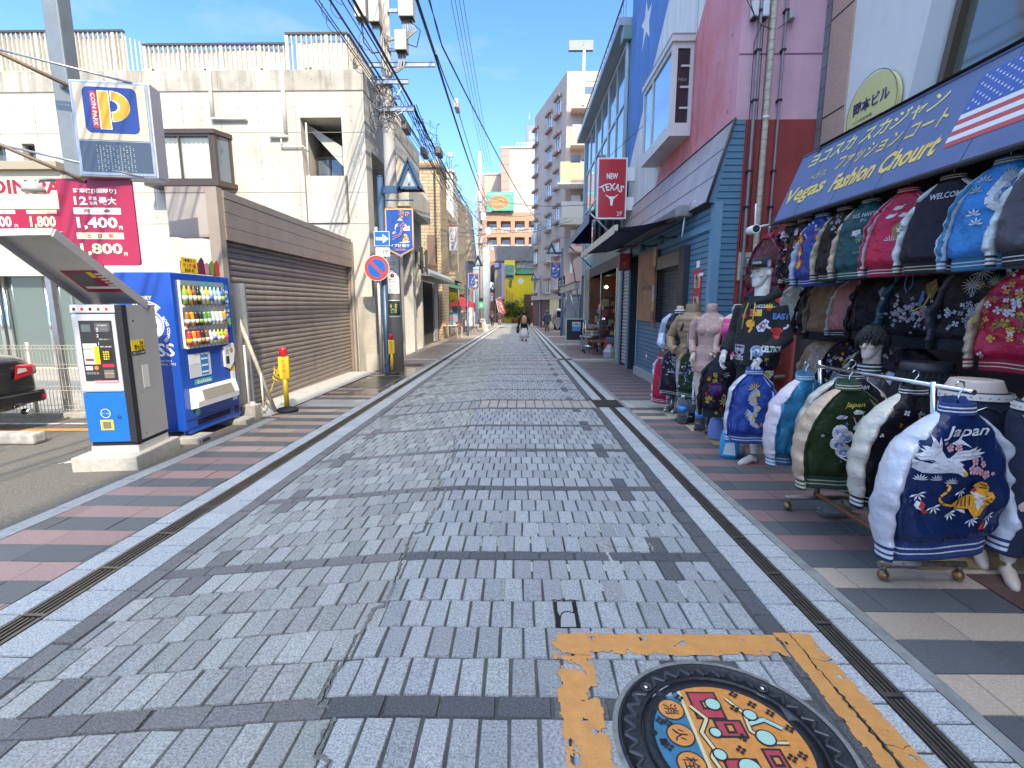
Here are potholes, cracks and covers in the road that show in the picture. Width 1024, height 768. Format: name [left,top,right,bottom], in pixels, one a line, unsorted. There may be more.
crack [600,543,653,572]
manhole cover [618,664,858,768]
